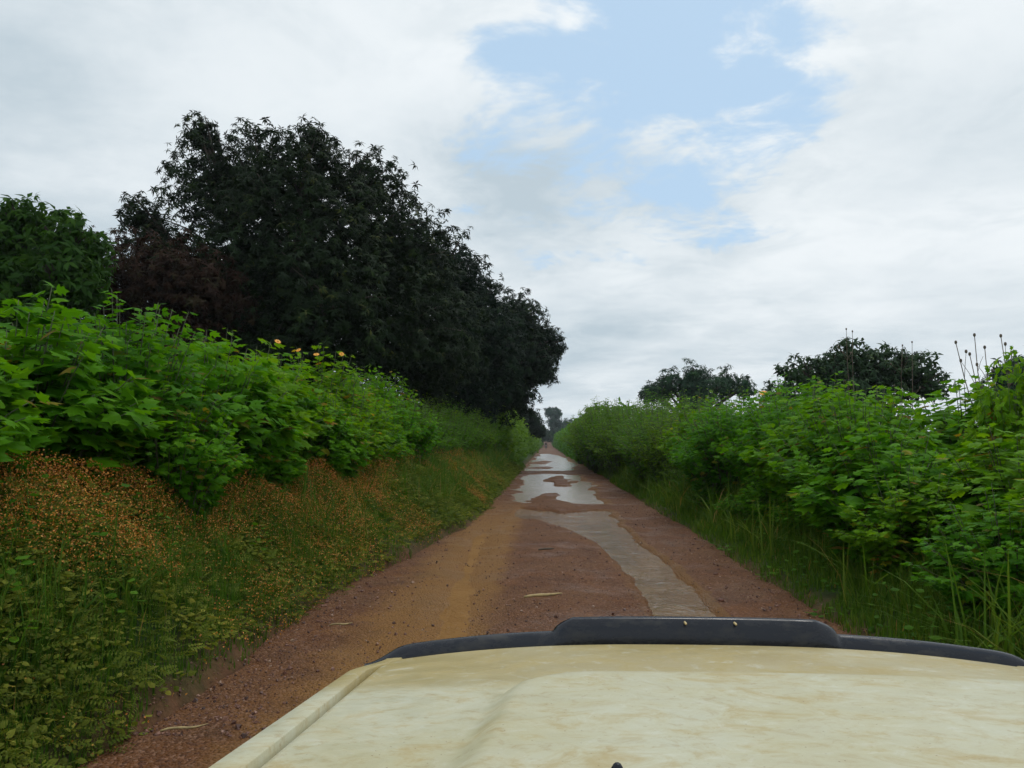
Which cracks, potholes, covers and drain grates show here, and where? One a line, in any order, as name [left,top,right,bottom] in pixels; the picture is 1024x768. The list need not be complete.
pothole [507,473,614,505]
pothole [523,454,581,471]
